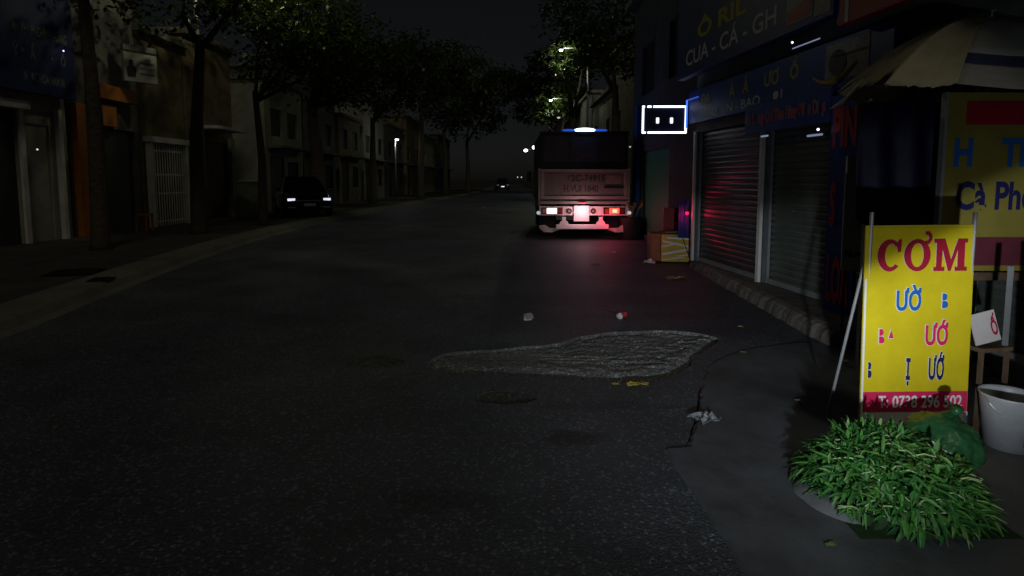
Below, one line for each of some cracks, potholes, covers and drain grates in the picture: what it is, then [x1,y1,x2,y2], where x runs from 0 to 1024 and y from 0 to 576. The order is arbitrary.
crack [685,383,701,446]
pothole [473,390,537,404]
